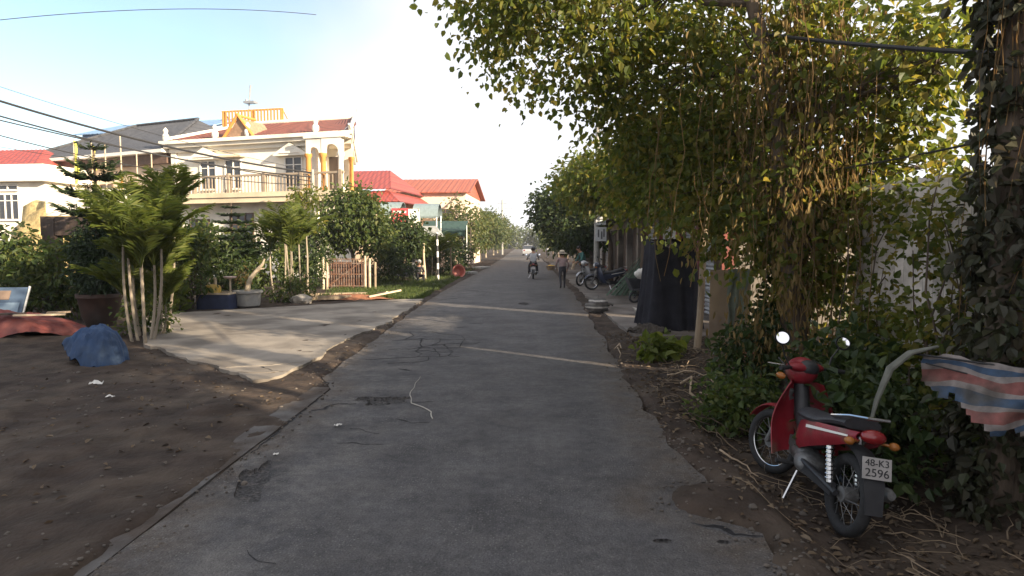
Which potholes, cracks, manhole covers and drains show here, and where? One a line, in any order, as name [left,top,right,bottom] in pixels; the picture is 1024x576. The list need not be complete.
pothole [234,460,272,503]
pothole [355,396,411,406]
crack [365,323,481,371]
crack [247,550,276,564]
crack [337,401,433,445]
crack [311,403,356,411]
crack [691,522,763,538]
